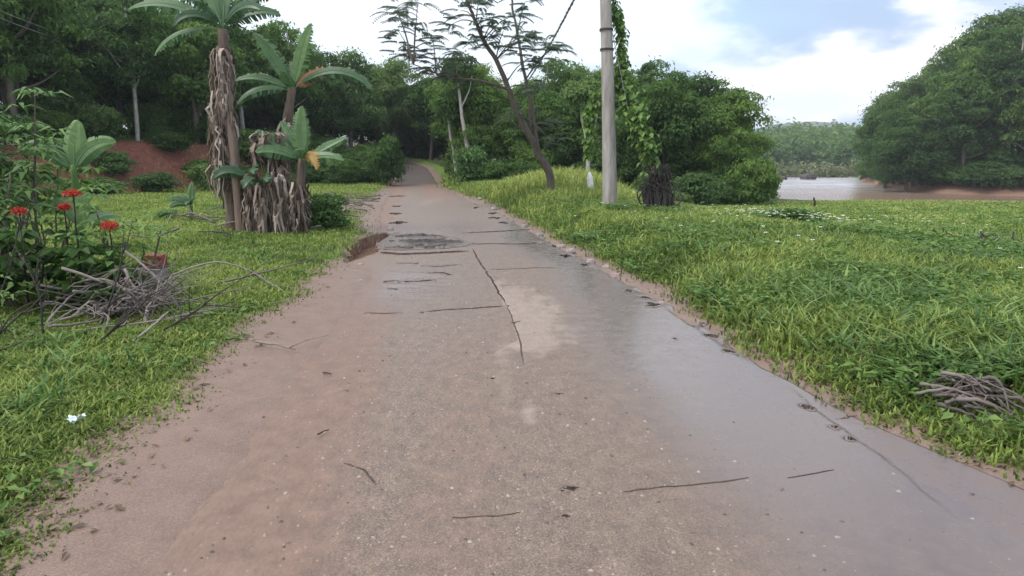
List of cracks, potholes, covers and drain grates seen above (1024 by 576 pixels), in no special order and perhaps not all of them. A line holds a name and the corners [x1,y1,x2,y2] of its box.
crack [422,305,523,360]
crack [624,477,749,492]
pothole [376,232,473,250]
pothole [348,232,390,263]
